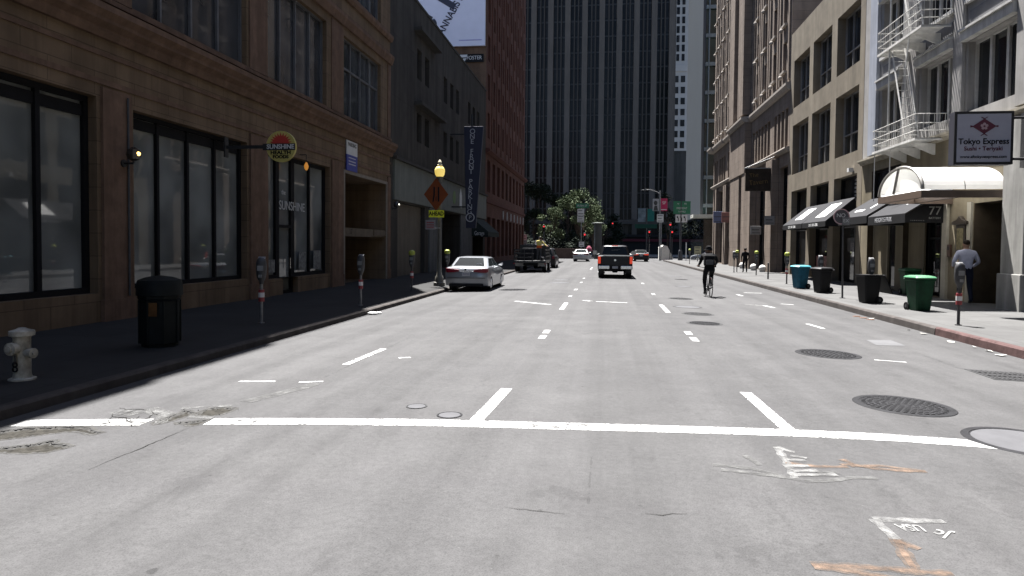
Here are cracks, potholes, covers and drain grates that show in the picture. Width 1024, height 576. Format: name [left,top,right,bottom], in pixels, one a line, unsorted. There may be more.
crack [84,408,190,470]
manhole cover [852,395,958,417]
manhole cover [960,427,1024,454]
manhole cover [795,349,862,359]
